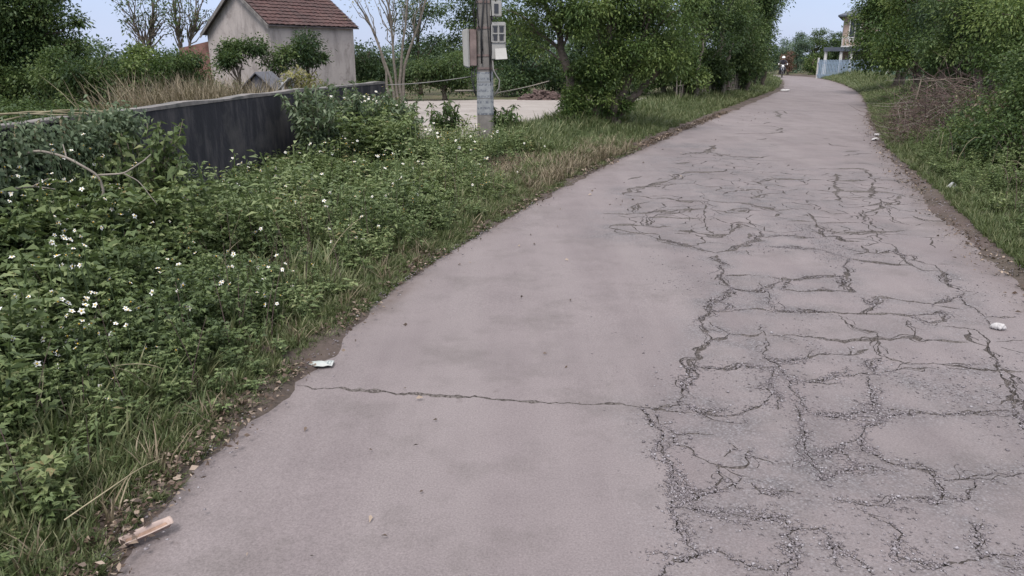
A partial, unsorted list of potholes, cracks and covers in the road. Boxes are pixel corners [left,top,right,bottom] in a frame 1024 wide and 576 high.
crack [306,110,1024,576]
